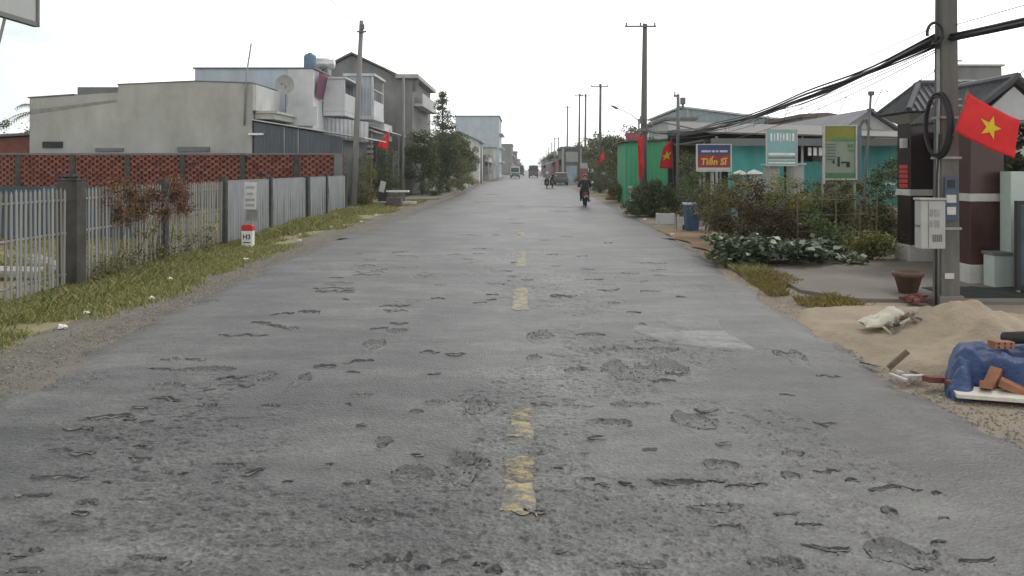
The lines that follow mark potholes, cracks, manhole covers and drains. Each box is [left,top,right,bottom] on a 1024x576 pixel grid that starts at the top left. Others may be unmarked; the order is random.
pothole [586,417,632,428]
pothole [701,459,739,470]
